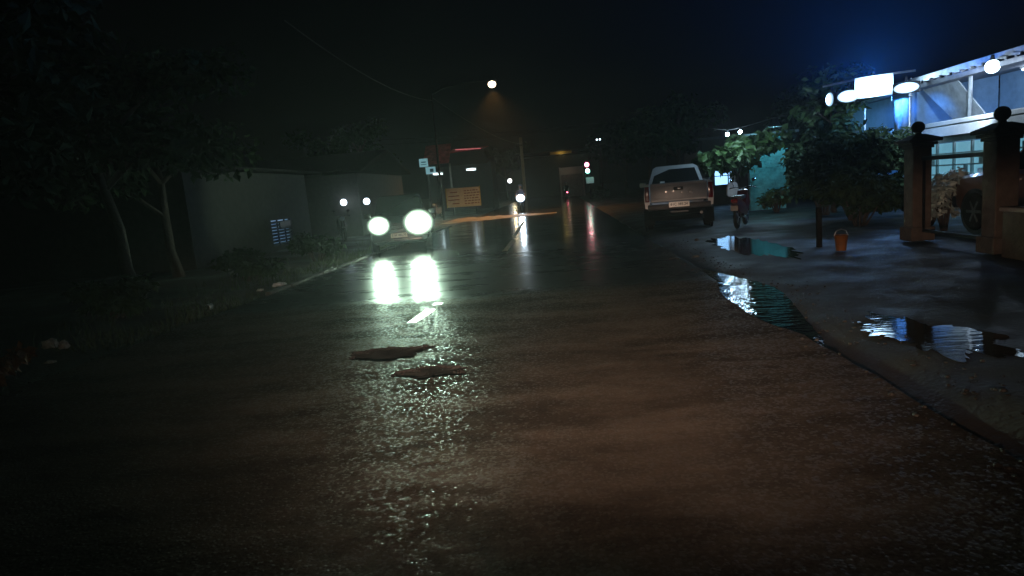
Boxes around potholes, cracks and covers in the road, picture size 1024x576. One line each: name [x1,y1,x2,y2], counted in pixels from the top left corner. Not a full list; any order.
pothole [391,365,468,380]
pothole [348,344,437,362]
